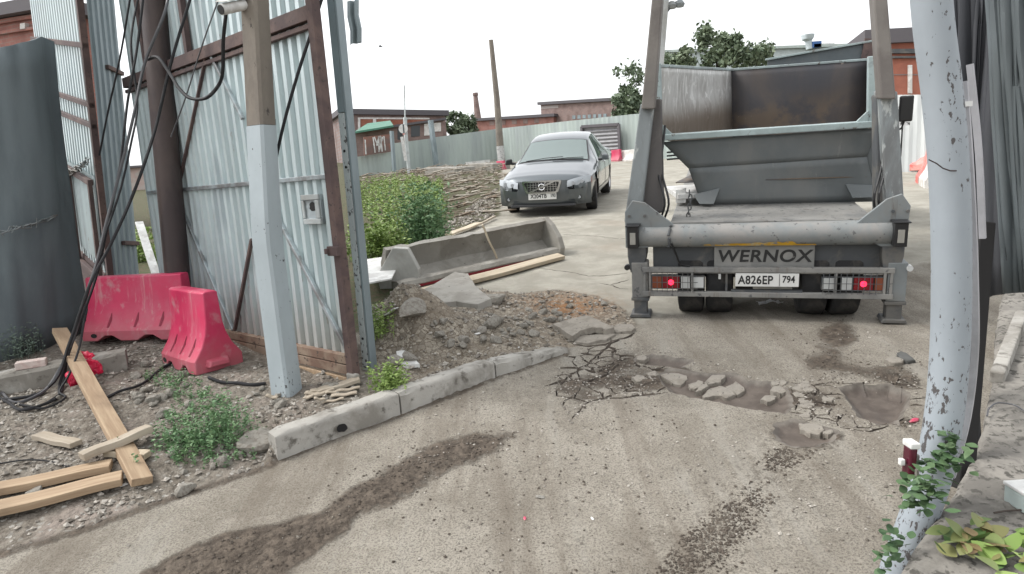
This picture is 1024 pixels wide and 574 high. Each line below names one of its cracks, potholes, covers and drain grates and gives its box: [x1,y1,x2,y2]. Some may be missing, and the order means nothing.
pothole [634,353,694,368]
pothole [838,382,911,425]
pothole [658,368,794,414]
pothole [772,418,840,448]
crack [546,333,666,419]
